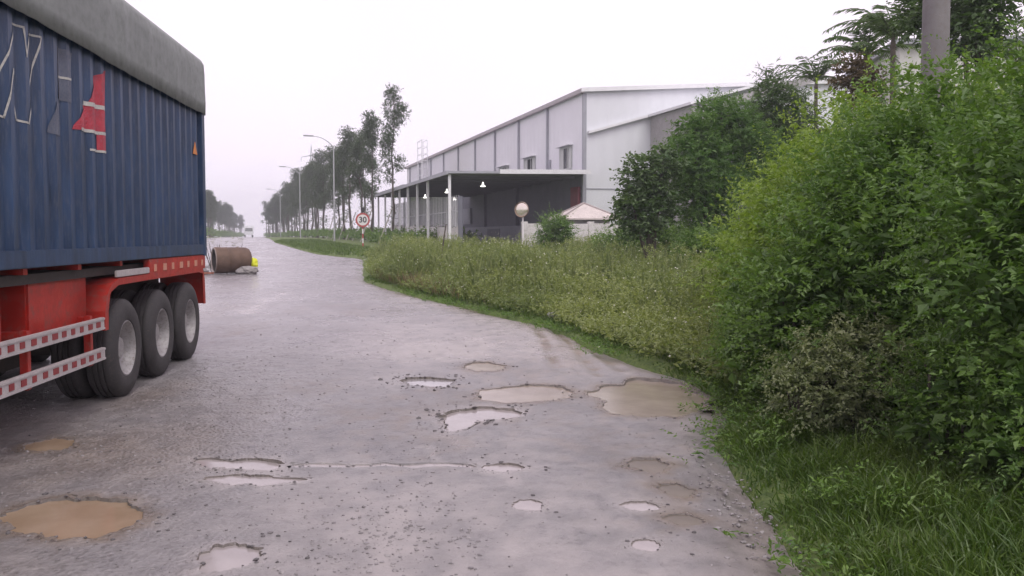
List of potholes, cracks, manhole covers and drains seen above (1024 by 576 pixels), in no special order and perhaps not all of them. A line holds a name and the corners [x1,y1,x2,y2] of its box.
pothole [622,453,697,477]
pothole [505,494,558,513]
pothole [157,455,309,473]
pothole [462,383,583,408]
pothole [454,359,518,372]
crack [291,461,476,469]
pothole [178,467,314,490]
pothole [378,374,470,391]
pothole [606,497,670,514]
pothole [651,510,711,534]
pothole [0,489,176,550]
